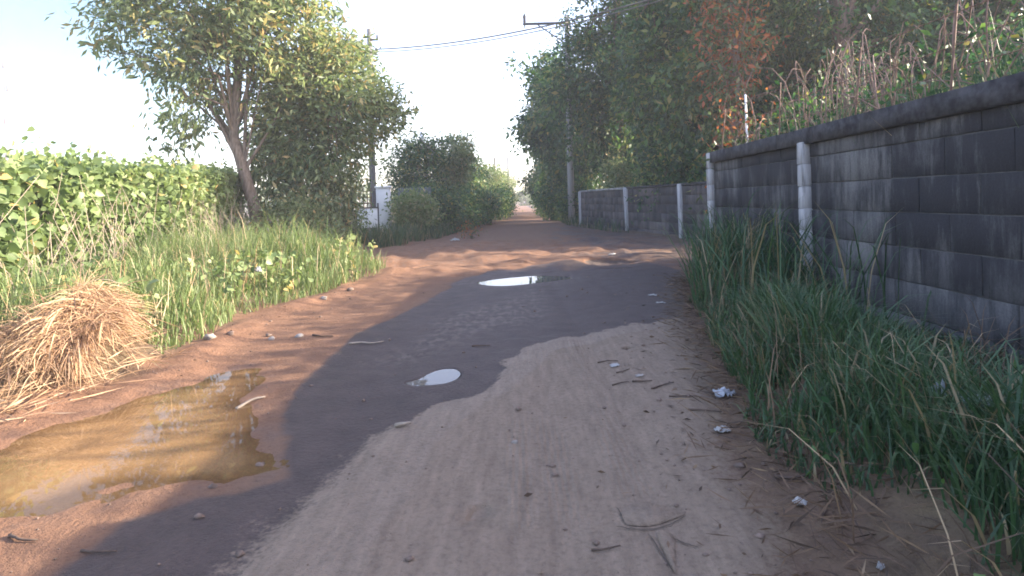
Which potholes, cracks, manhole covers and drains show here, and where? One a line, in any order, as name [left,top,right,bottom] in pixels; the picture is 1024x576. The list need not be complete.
pothole [398,366,469,388]
pothole [474,275,576,286]
